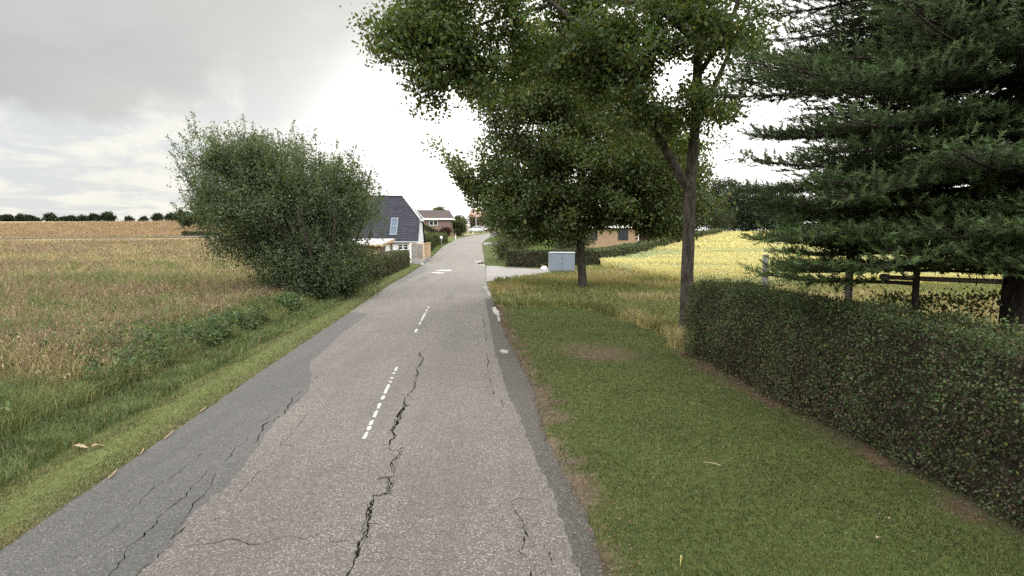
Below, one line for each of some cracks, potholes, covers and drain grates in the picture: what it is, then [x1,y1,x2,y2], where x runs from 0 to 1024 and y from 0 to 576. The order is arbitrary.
crack [511,498,553,576]
crack [95,351,424,576]
